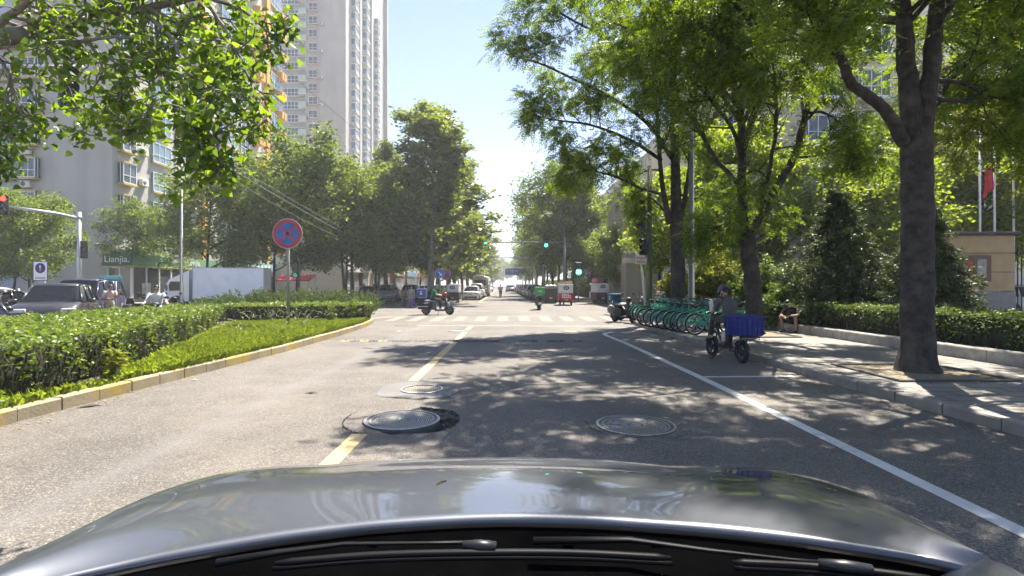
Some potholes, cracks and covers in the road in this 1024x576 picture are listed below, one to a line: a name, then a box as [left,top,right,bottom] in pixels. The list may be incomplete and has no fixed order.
manhole cover [363,410,440,435]
manhole cover [400,385,443,394]
manhole cover [596,415,677,437]
